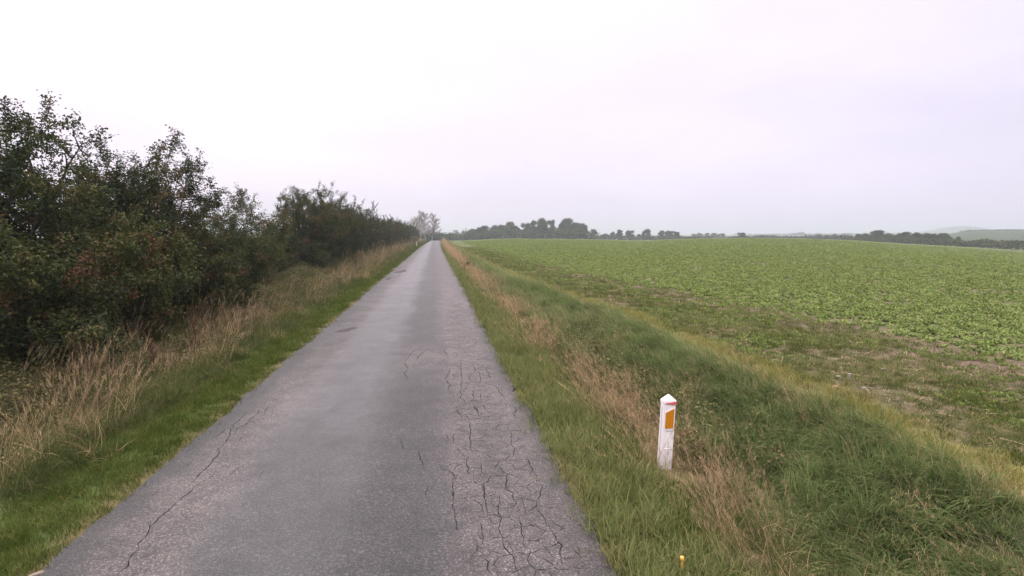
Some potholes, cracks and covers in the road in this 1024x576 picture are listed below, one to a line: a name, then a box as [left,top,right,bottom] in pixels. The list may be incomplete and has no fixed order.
crack [438,296,581,576]
crack [118,409,266,574]
